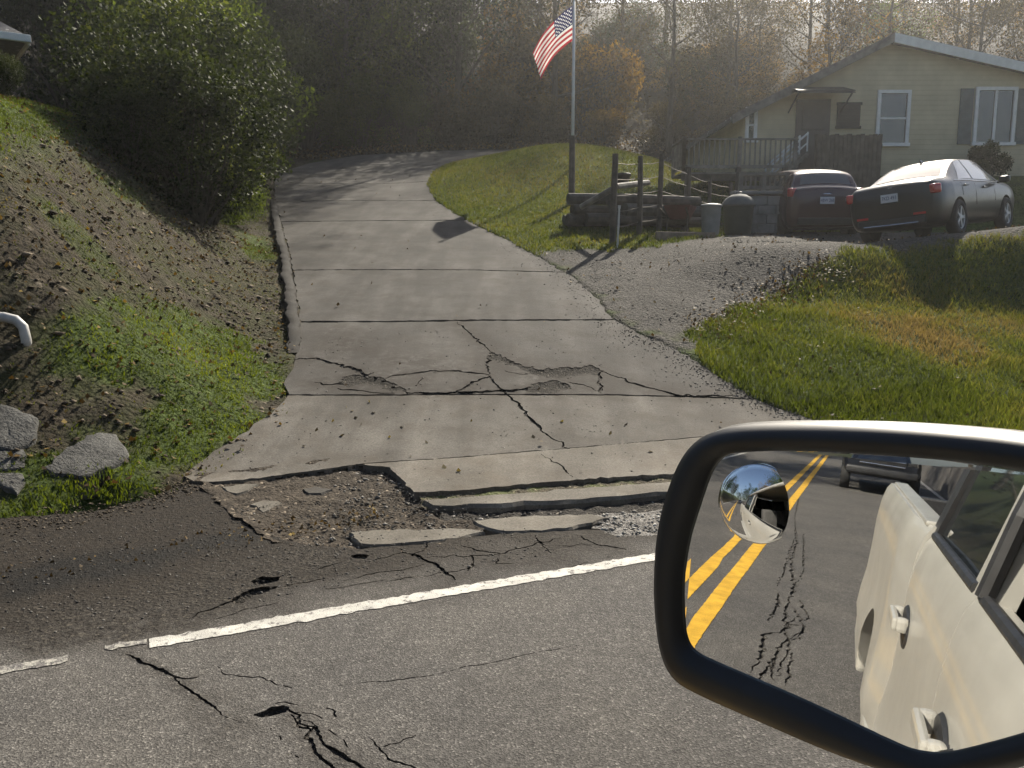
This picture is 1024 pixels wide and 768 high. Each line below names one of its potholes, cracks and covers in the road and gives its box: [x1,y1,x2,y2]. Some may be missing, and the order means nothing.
crack [339,646,571,686]
crack [220,670,415,768]
crack [129,655,237,721]
pothole [194,458,484,552]
crack [295,322,731,589]
pothole [253,705,289,717]
